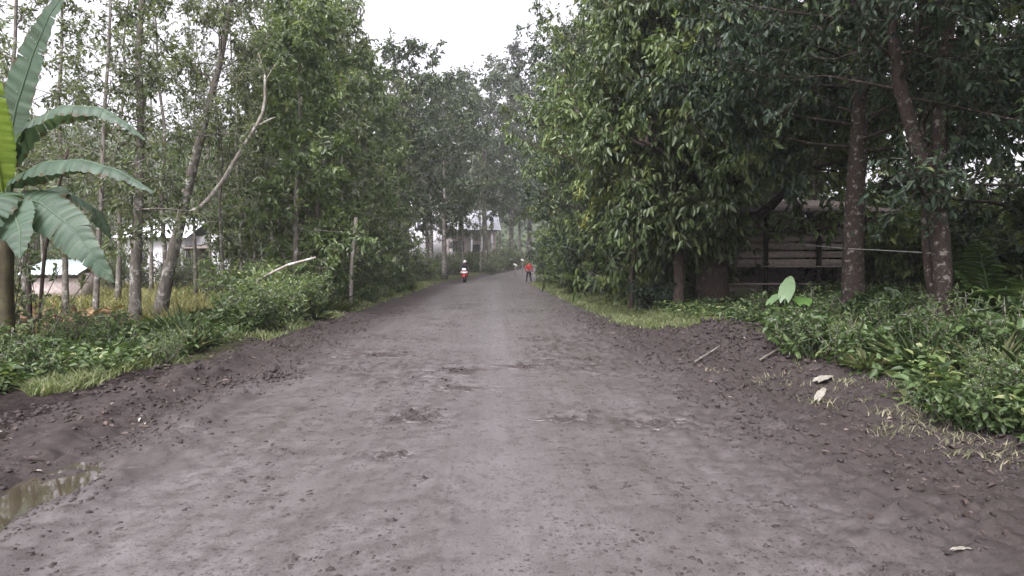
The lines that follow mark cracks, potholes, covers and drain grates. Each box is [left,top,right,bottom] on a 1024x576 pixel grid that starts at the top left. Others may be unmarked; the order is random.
pothole [371,449,413,460]
pothole [490,361,557,370]
pothole [422,364,502,376]
pothole [433,383,507,393]
pothole [373,406,449,425]
pothole [526,414,591,423]
